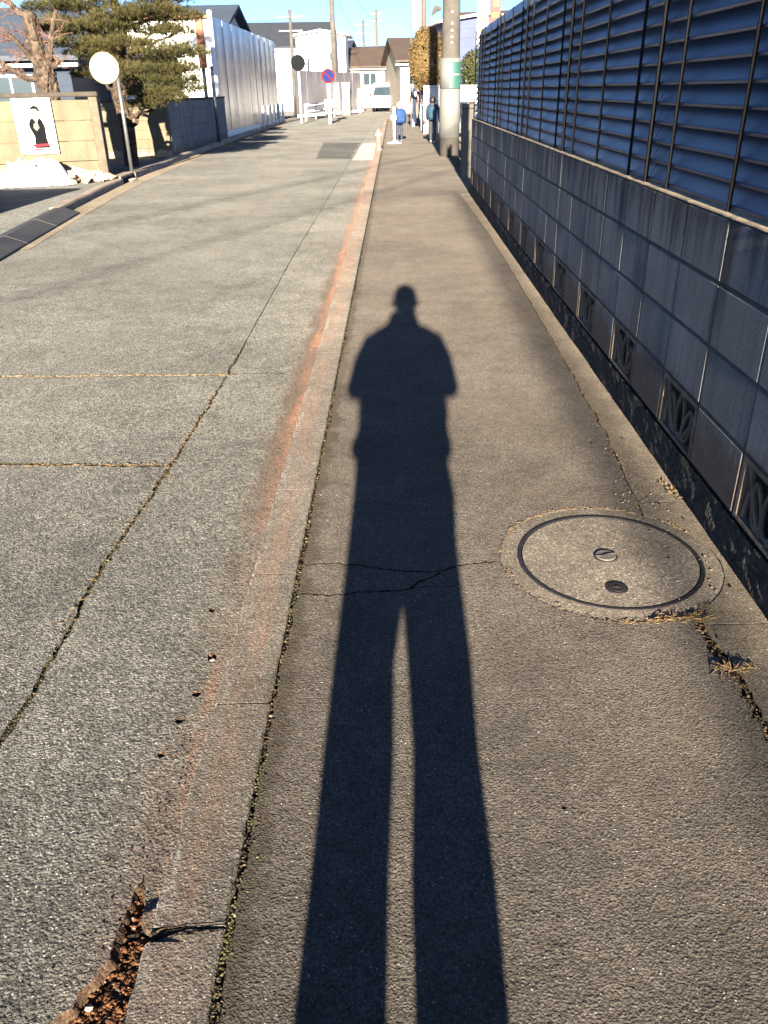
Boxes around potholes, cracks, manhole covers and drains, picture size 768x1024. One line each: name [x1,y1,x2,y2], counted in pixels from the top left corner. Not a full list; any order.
manhole cover [500,509,724,622]
crack [300,561,498,596]
pothole [50,875,154,1024]
